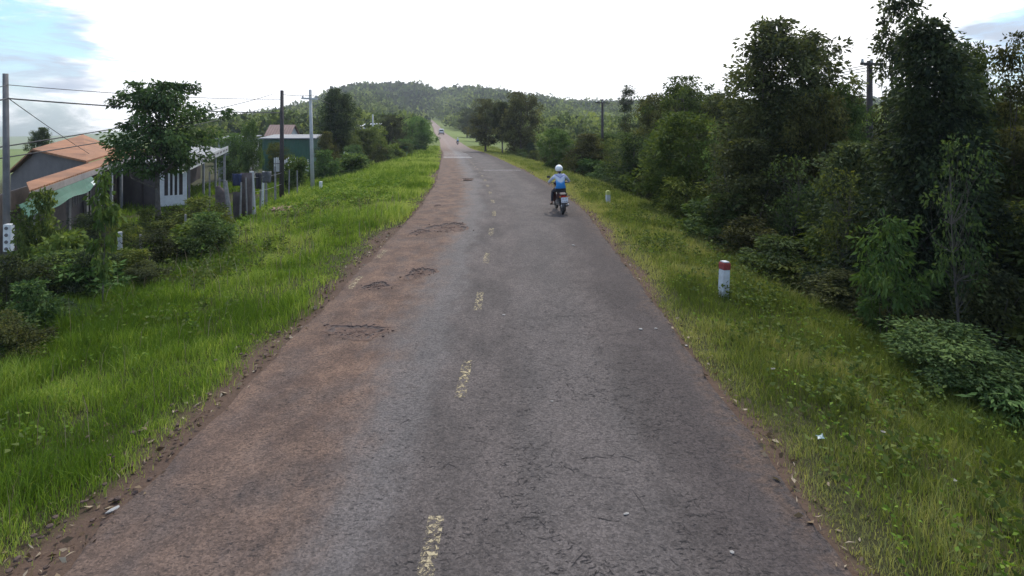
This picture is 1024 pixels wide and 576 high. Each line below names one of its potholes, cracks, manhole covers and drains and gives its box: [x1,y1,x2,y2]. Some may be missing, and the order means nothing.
pothole [419,222,474,232]
pothole [323,323,394,341]
pothole [400,266,439,281]
pothole [358,280,394,290]
